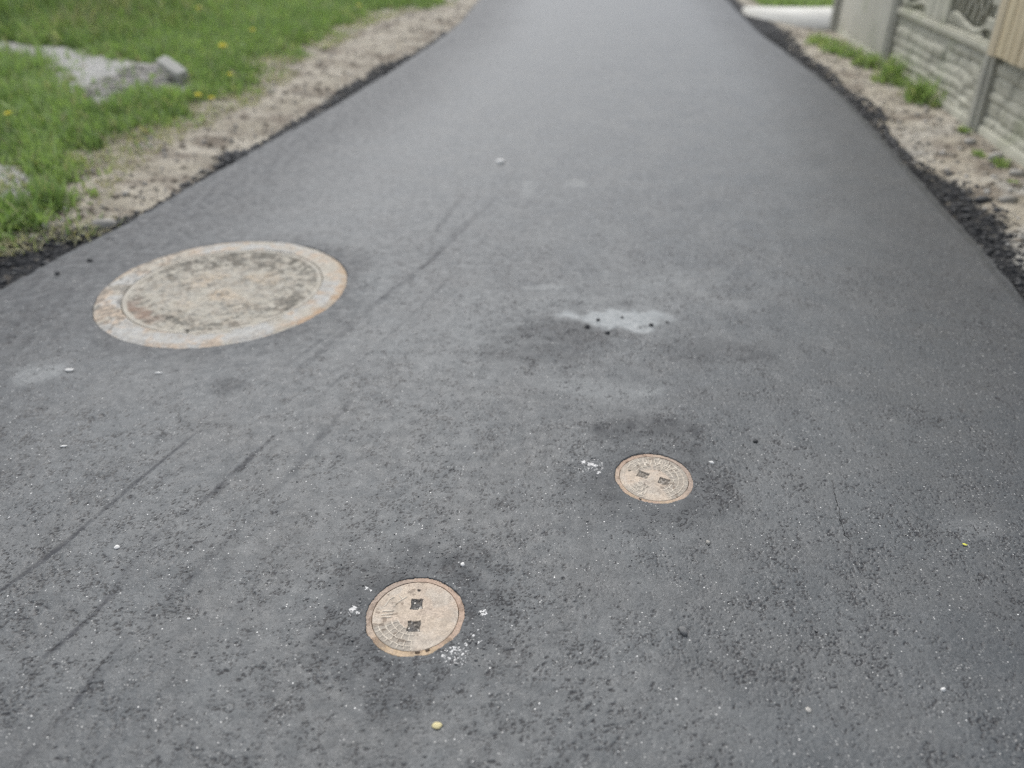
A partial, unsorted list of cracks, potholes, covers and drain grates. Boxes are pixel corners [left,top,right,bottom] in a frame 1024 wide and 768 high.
manhole cover [366,578,465,657]
manhole cover [615,454,693,504]
manhole cover [93,242,347,349]
